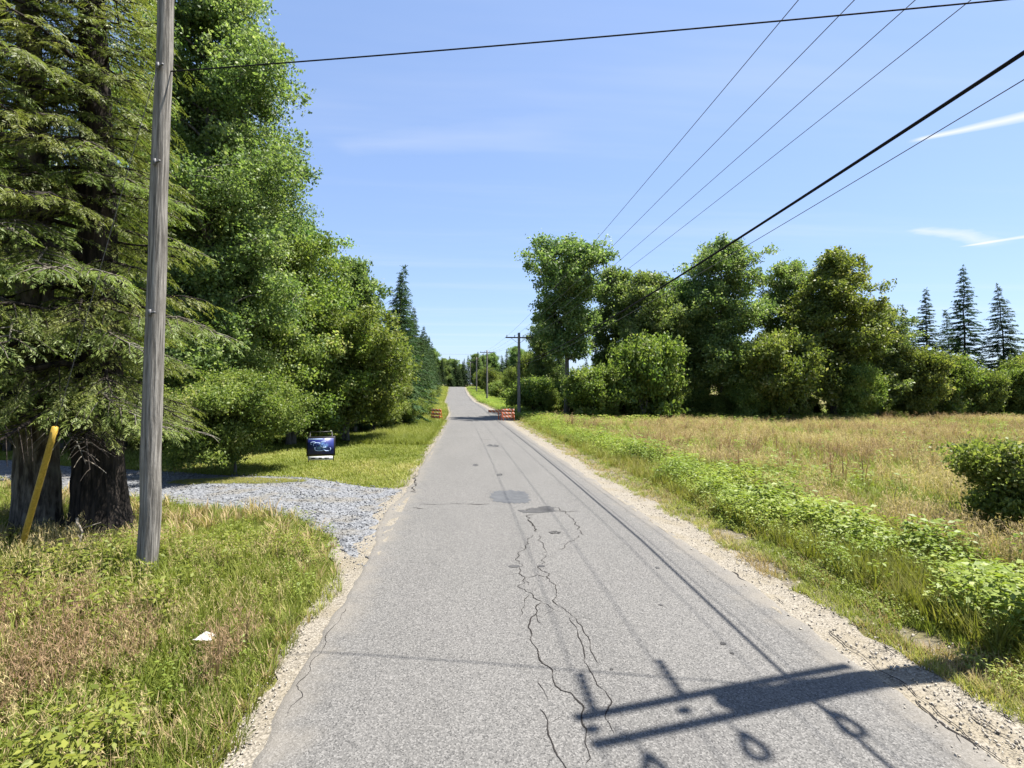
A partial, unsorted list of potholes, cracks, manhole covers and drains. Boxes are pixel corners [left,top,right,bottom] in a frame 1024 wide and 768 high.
crack [288,609,346,711]
crack [515,507,614,768]
